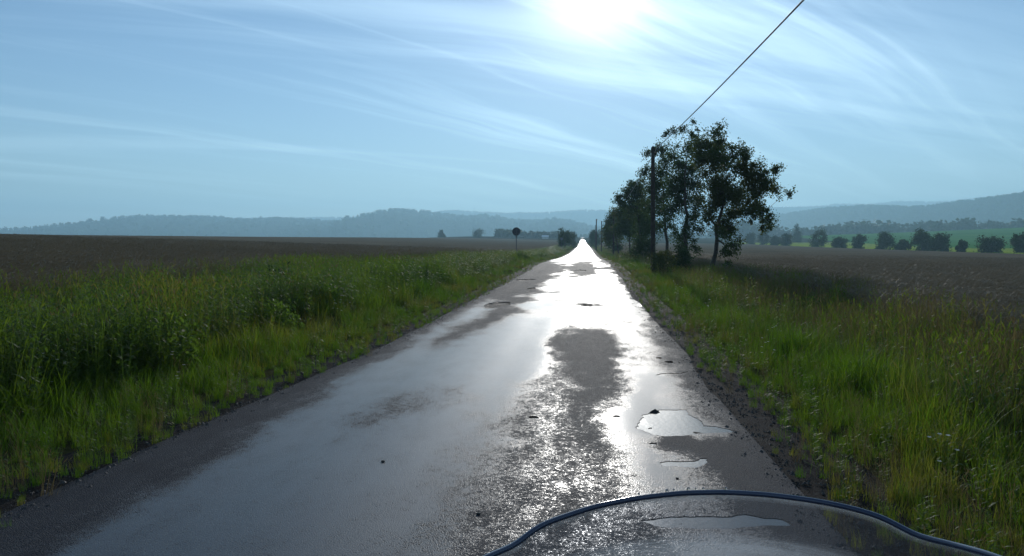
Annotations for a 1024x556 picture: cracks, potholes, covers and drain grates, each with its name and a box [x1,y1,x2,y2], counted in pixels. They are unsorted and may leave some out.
pothole [635,409,737,436]
pothole [660,458,708,468]
